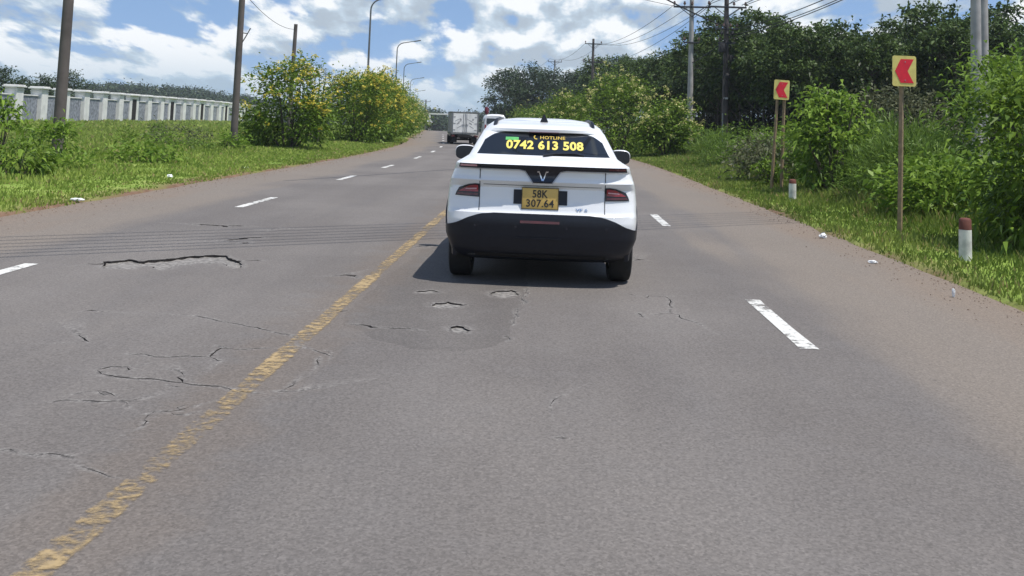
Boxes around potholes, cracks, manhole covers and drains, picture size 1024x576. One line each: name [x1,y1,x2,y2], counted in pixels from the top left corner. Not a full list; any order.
pothole [103,255,242,270]
pothole [491,290,519,298]
crack [55,316,293,424]
crack [199,224,261,261]
